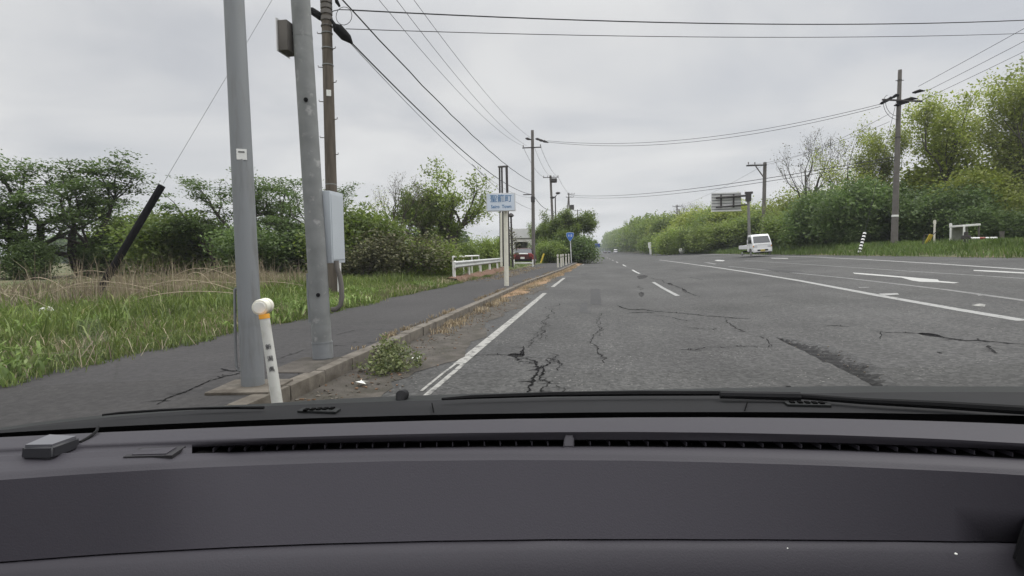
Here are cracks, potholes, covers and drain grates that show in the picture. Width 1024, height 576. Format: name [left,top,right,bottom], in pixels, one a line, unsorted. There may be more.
crack [147,368,238,404]
crack [590,305,772,363]
crack [487,304,565,392]
crack [938,337,1018,353]
